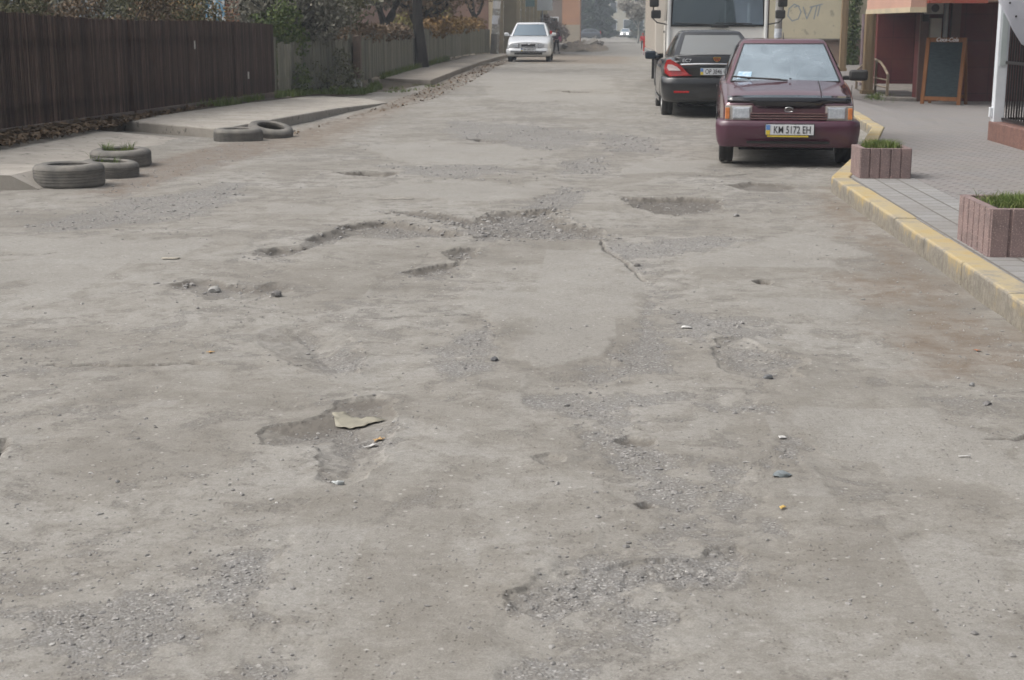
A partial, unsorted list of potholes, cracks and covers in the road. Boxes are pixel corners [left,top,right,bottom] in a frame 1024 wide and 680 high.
pothole [731,183,797,192]
pothole [399,209,607,240]
pothole [624,198,724,216]
crack [564,238,648,282]
pothole [508,549,745,619]
pothole [258,396,398,486]
pothole [169,279,291,300]
pothole [405,249,478,278]
pothole [714,338,809,380]
pothole [256,222,465,258]
